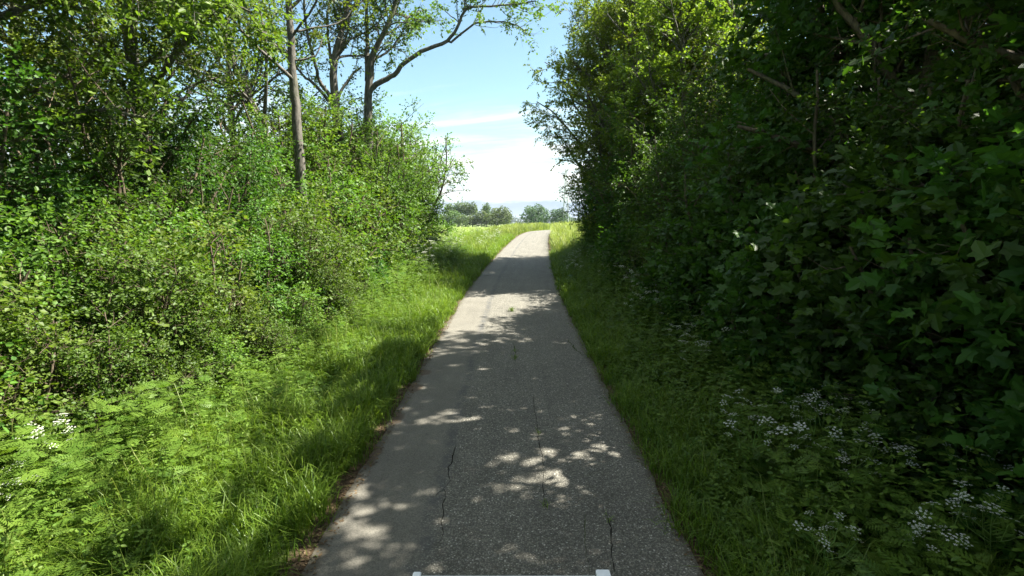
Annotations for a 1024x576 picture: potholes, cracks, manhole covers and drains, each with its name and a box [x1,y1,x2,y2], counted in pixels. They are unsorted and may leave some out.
crack [607,517,615,572]
crack [514,346,551,525]
crack [438,447,459,557]
